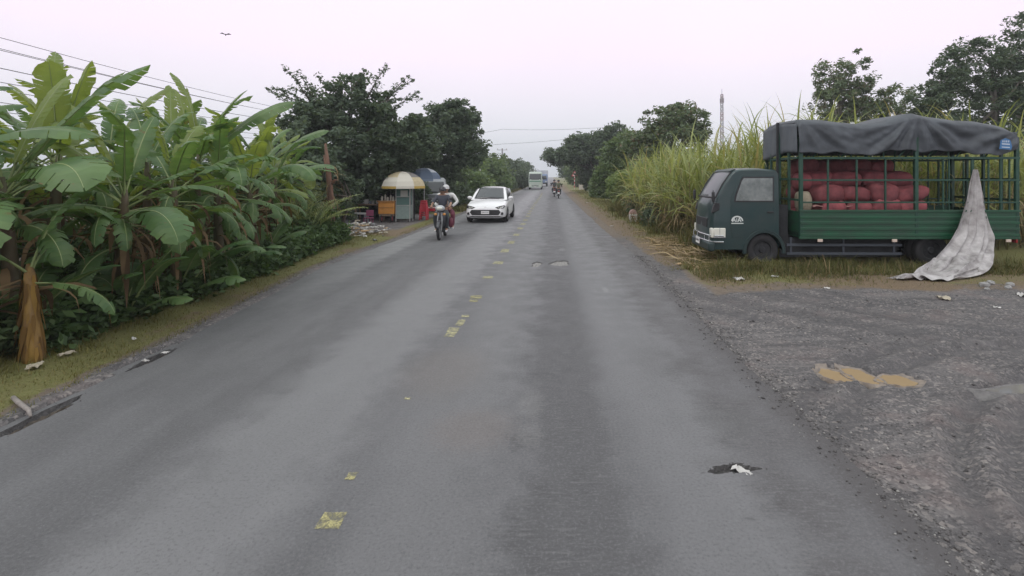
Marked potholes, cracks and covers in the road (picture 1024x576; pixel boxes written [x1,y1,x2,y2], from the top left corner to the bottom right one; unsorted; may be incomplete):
pothole [701,462,767,474]
pothole [0,393,86,437]
pothole [812,363,926,389]
pothole [125,348,177,372]
